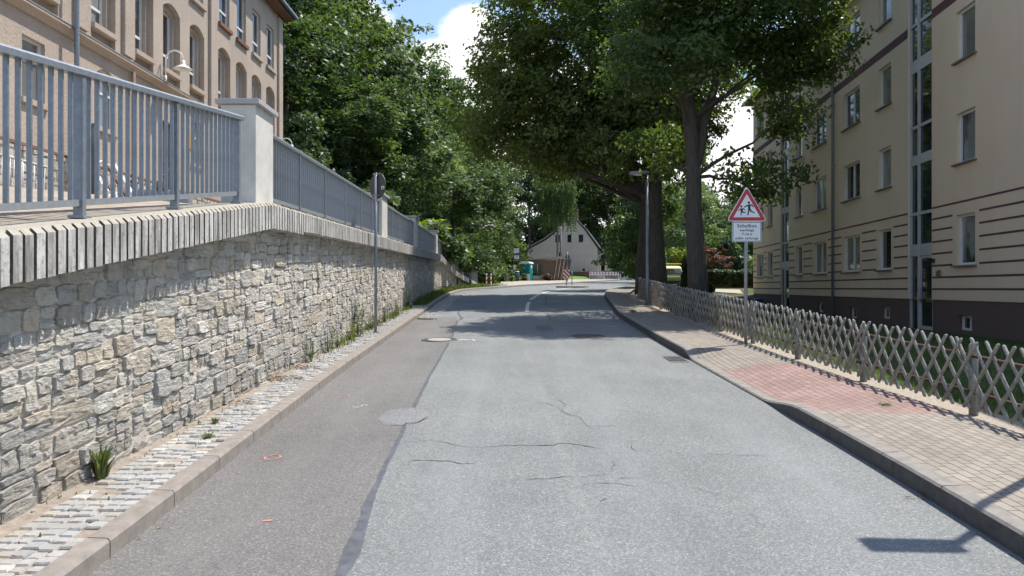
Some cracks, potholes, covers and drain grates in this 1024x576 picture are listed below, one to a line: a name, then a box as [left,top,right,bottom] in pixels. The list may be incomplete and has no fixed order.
crack [379,400,651,501]
manhole cover [378,408,429,426]
